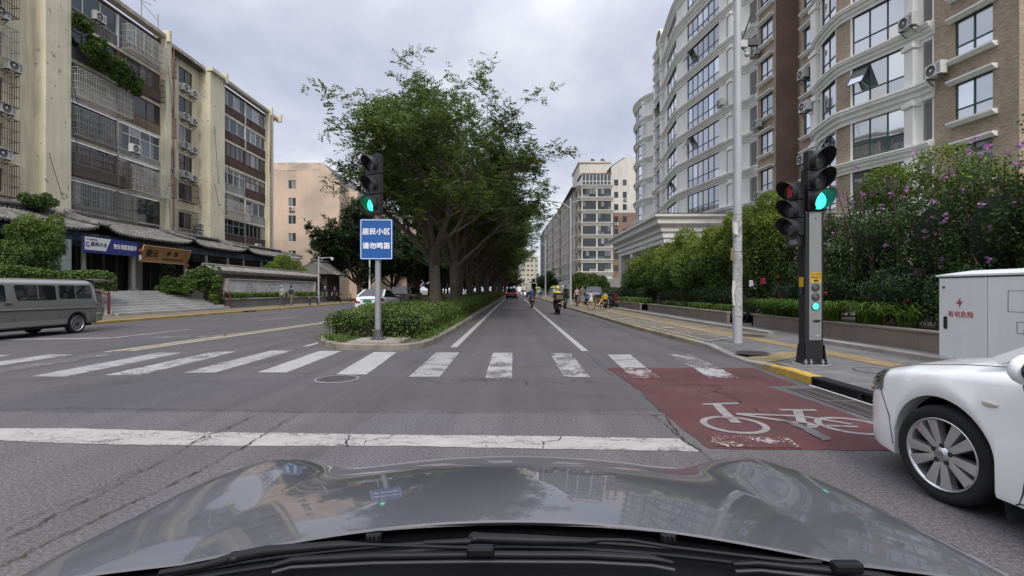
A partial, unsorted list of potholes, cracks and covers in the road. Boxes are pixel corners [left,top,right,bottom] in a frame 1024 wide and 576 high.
drain grate [788,388,873,419]
crack [0,412,302,566]
manhole cover [314,375,359,383]
